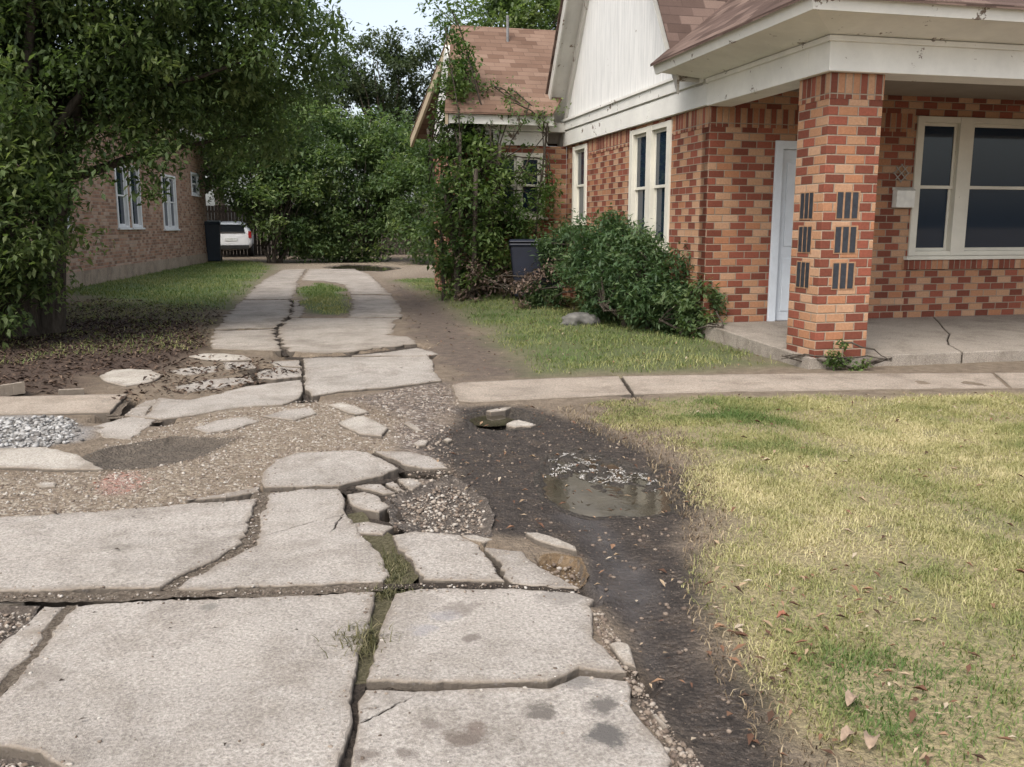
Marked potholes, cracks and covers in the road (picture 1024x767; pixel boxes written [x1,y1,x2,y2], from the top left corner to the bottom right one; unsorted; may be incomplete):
crack [0,605,77,697]
pothole [533,447,685,520]
crack [216,302,421,403]
pothole [534,553,589,589]
crack [161,453,631,767]
pothole [461,407,548,432]
